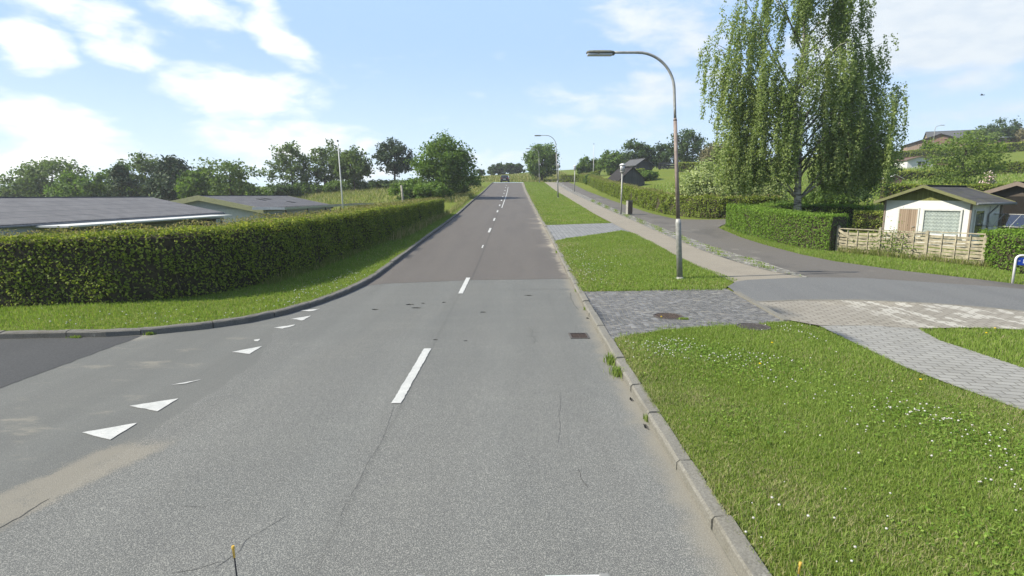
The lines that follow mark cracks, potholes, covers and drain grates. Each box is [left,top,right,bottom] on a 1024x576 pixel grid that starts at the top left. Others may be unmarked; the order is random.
crack [174,516,285,573]
manhole cover [736,323,771,331]
